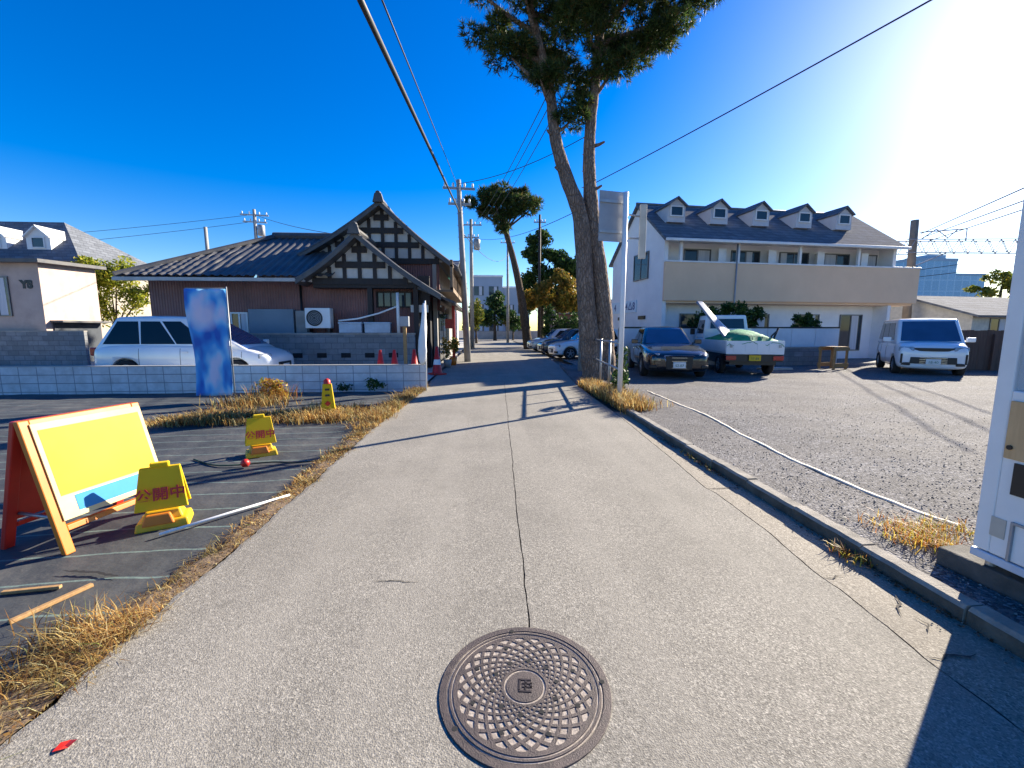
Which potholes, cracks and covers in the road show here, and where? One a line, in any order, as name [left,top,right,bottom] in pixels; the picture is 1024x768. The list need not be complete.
manhole cover [439,627,612,768]
crack [504,384,530,627]
